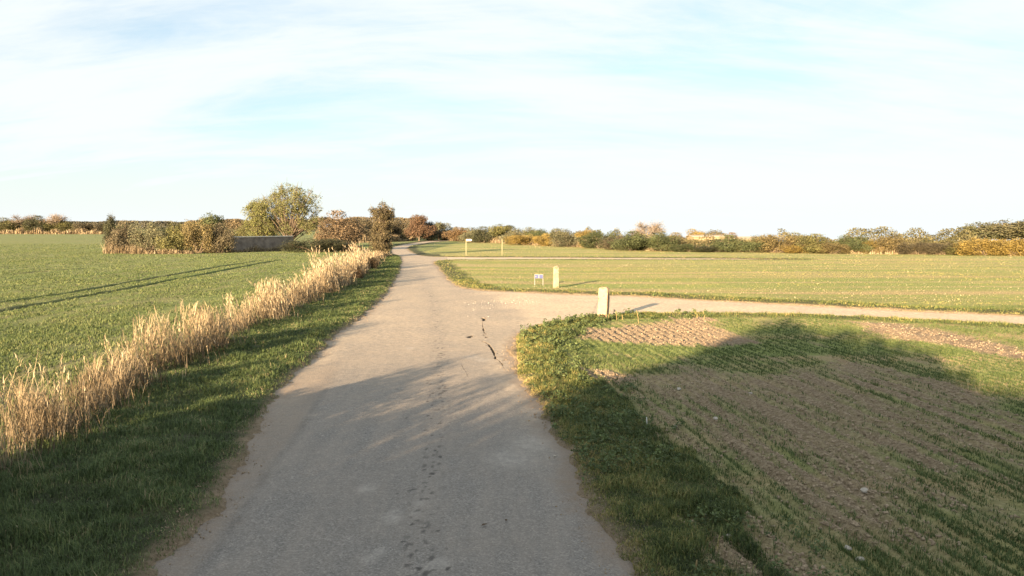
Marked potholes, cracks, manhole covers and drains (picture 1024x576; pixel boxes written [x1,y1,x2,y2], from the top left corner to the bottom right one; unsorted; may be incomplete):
crack [461,321,505,378]
